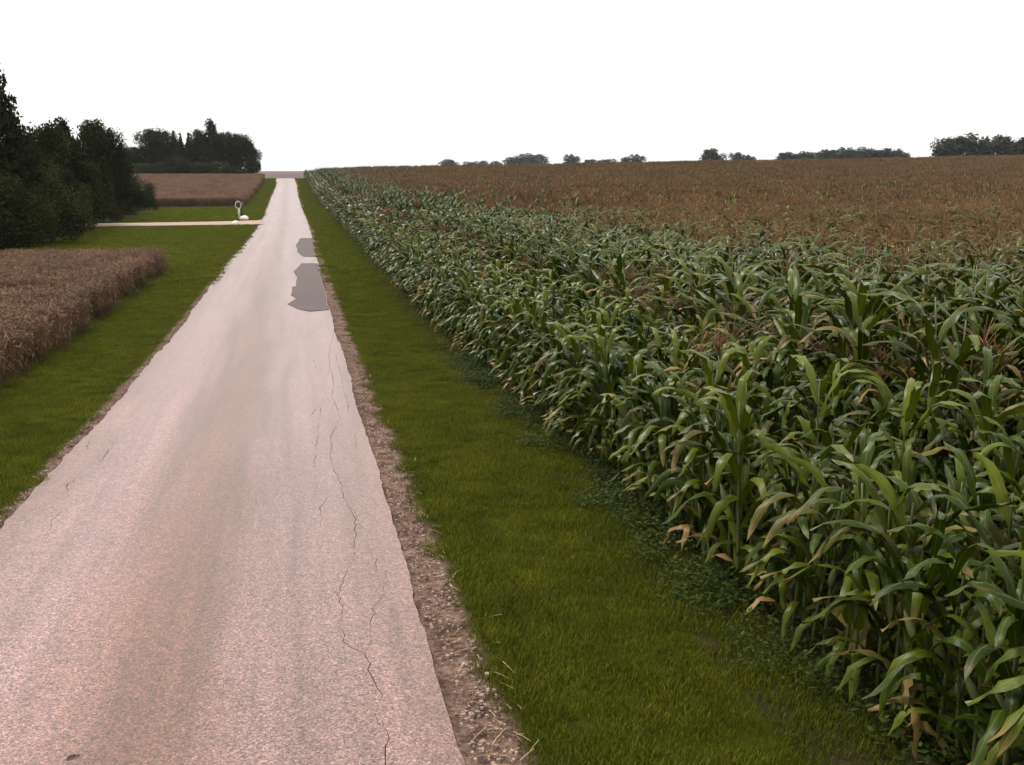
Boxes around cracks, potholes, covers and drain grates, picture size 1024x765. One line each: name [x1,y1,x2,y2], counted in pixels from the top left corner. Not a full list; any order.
crack [309,338,390,765]
